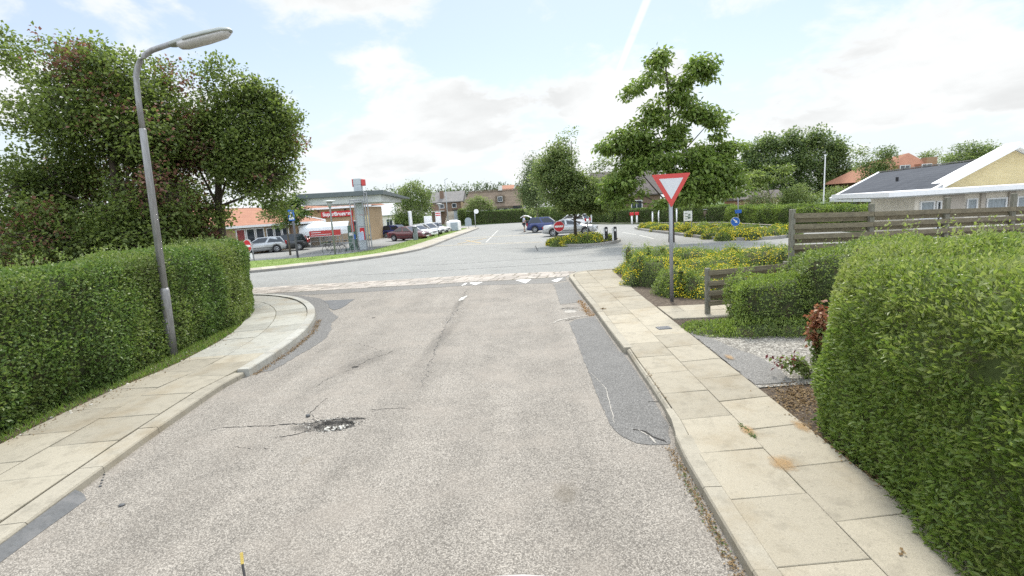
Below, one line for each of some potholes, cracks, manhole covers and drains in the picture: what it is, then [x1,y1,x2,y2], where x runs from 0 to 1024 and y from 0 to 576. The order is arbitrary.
crack [222,345,407,451]
pothole [314,420,355,432]
